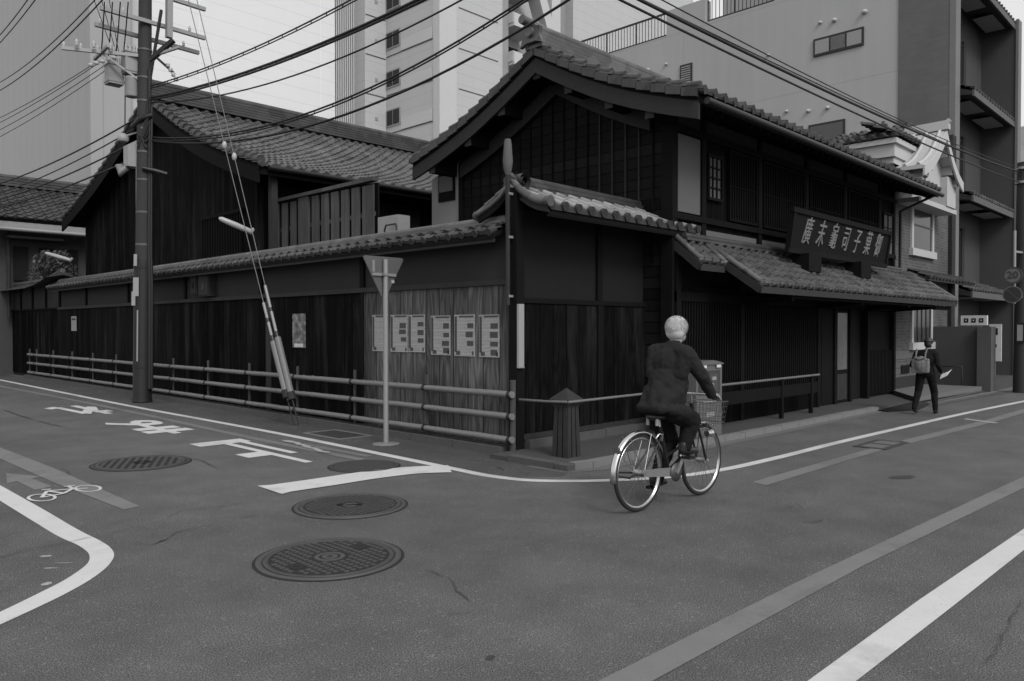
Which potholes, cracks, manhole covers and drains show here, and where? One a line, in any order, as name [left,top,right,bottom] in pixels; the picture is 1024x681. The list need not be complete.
manhole cover [252,537,404,582]
manhole cover [89,455,192,472]
crack [424,569,470,615]
manhole cover [291,493,408,520]
crack [112,498,270,545]
crack [986,599,1021,663]
manhole cover [327,460,401,473]
